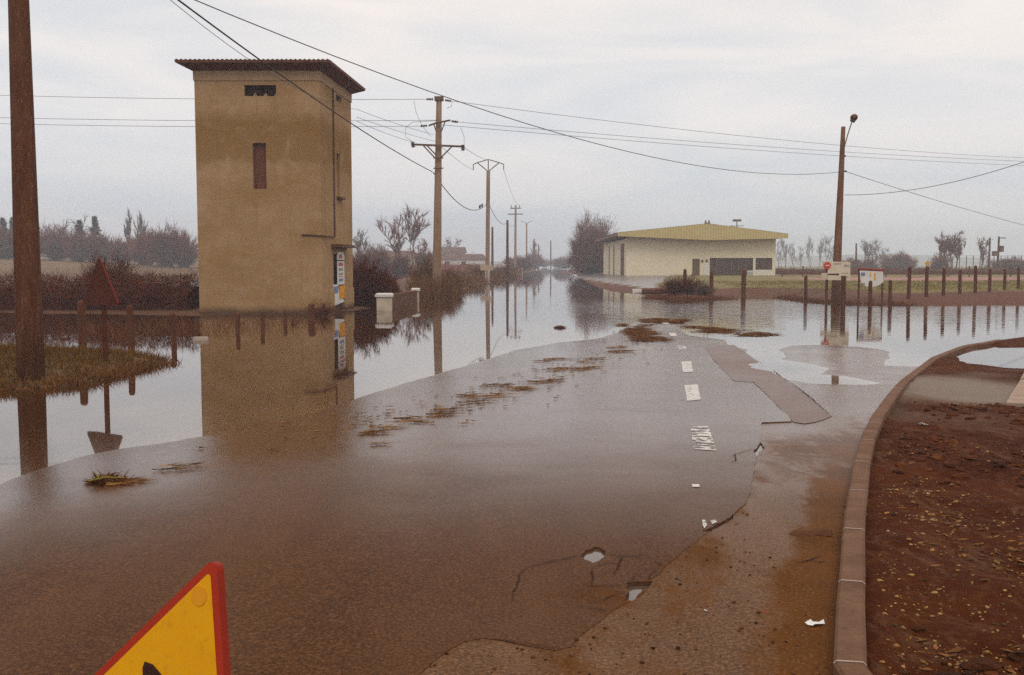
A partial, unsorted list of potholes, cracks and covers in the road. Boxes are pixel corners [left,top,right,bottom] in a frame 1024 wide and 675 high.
crack [512,553,663,610]
pothole [625,582,652,601]
pothole [582,548,606,563]
